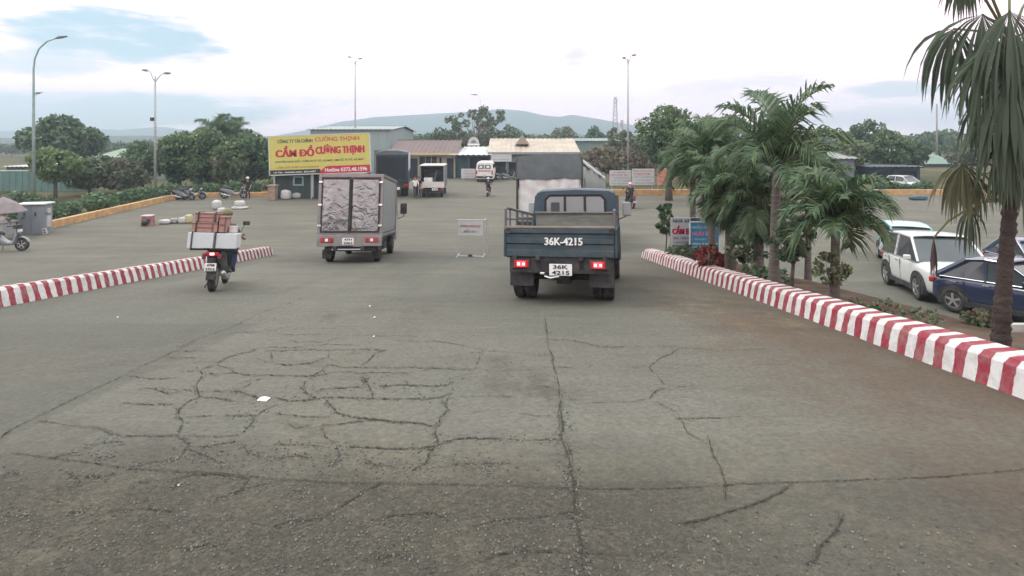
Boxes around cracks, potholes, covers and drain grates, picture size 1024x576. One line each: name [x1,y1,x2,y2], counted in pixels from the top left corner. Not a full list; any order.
crack [1,290,1021,576]
